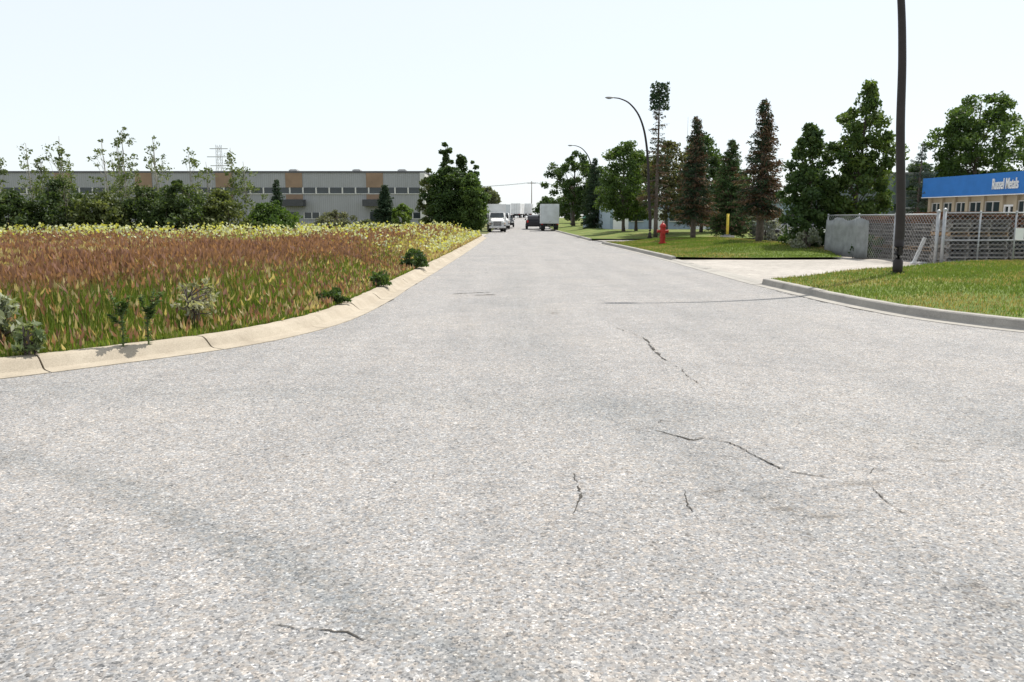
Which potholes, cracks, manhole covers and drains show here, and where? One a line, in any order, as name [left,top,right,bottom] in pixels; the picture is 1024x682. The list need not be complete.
crack [573,474,585,514]
crack [630,420,908,517]
crack [274,624,369,641]
crack [614,327,701,385]
